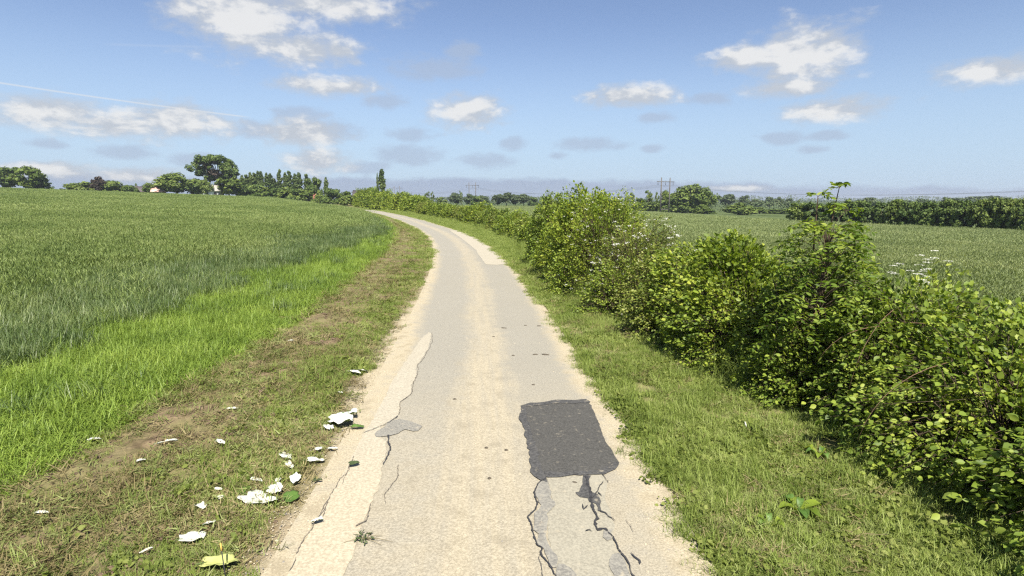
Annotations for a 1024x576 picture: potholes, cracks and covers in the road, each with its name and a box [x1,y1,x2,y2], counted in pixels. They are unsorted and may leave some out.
crack [290,456,354,569]
crack [527,472,641,576]
